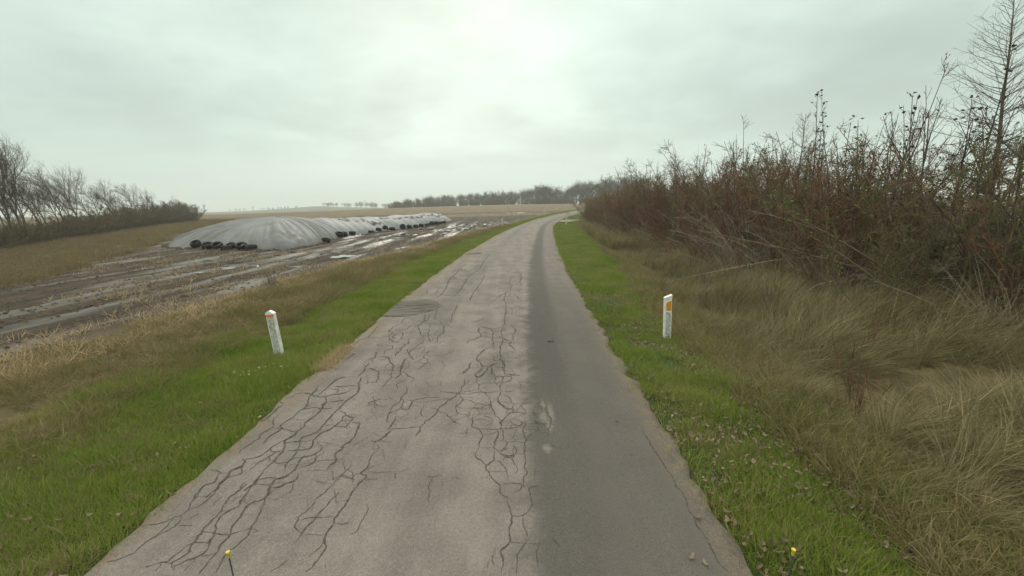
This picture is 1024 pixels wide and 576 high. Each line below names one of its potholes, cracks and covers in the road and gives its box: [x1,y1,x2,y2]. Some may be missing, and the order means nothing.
crack [113,256,560,574]
